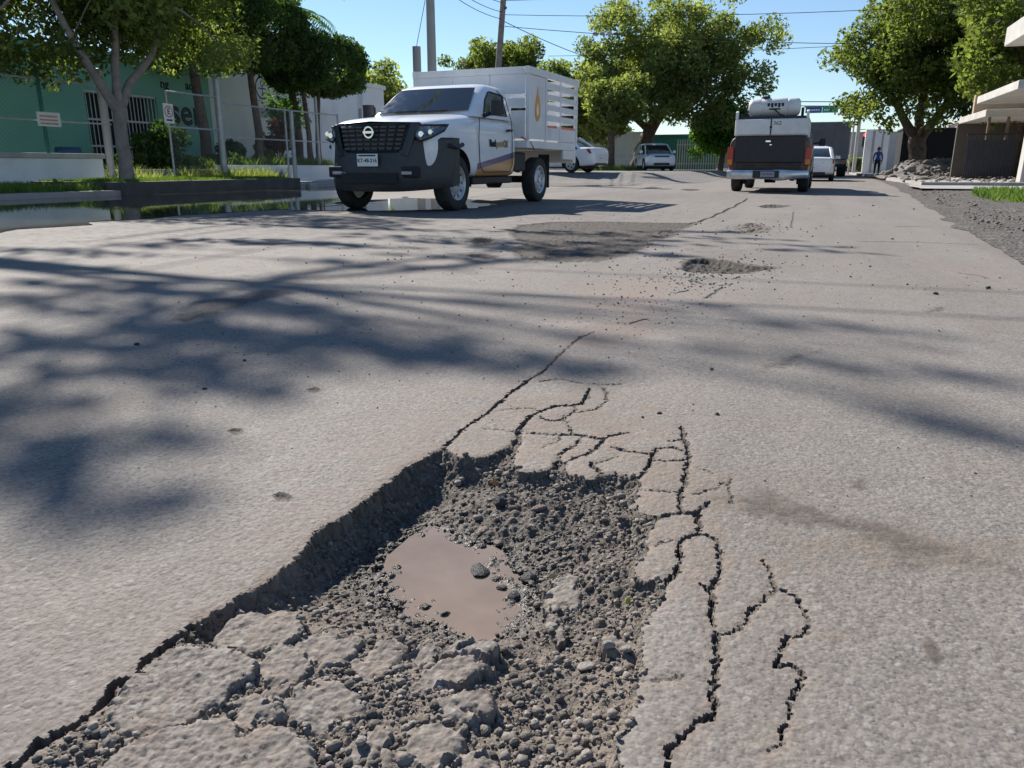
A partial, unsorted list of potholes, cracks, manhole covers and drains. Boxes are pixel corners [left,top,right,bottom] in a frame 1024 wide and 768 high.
pothole [678,258,782,275]
pothole [31,436,666,768]
crack [483,378,811,768]
